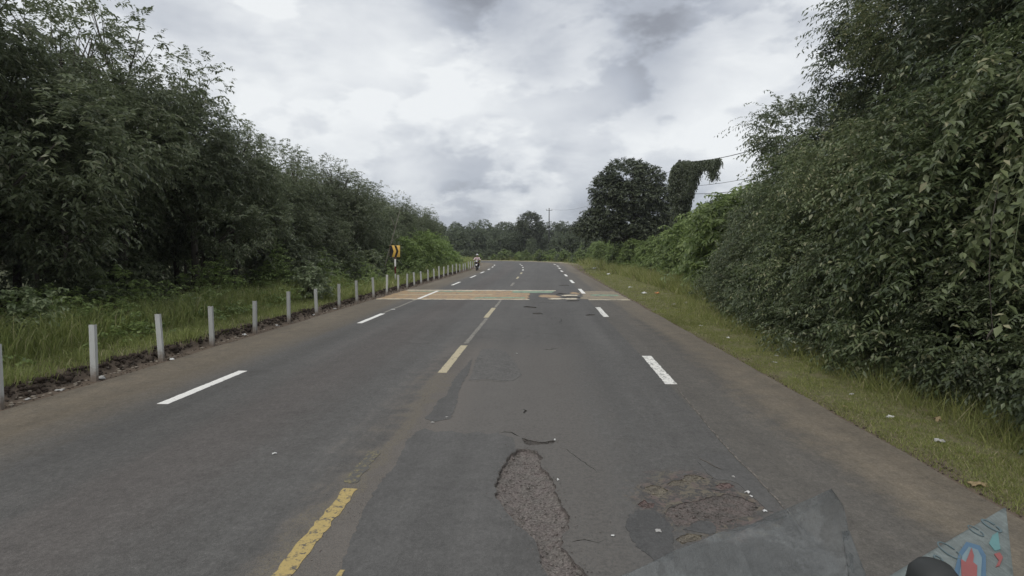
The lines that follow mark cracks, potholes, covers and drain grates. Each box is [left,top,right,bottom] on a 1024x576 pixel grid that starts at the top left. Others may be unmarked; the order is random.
pothole [495,449,587,576]
pothole [645,485,668,497]
pothole [667,475,705,486]
pothole [676,533,702,544]
pothole [665,494,758,527]
